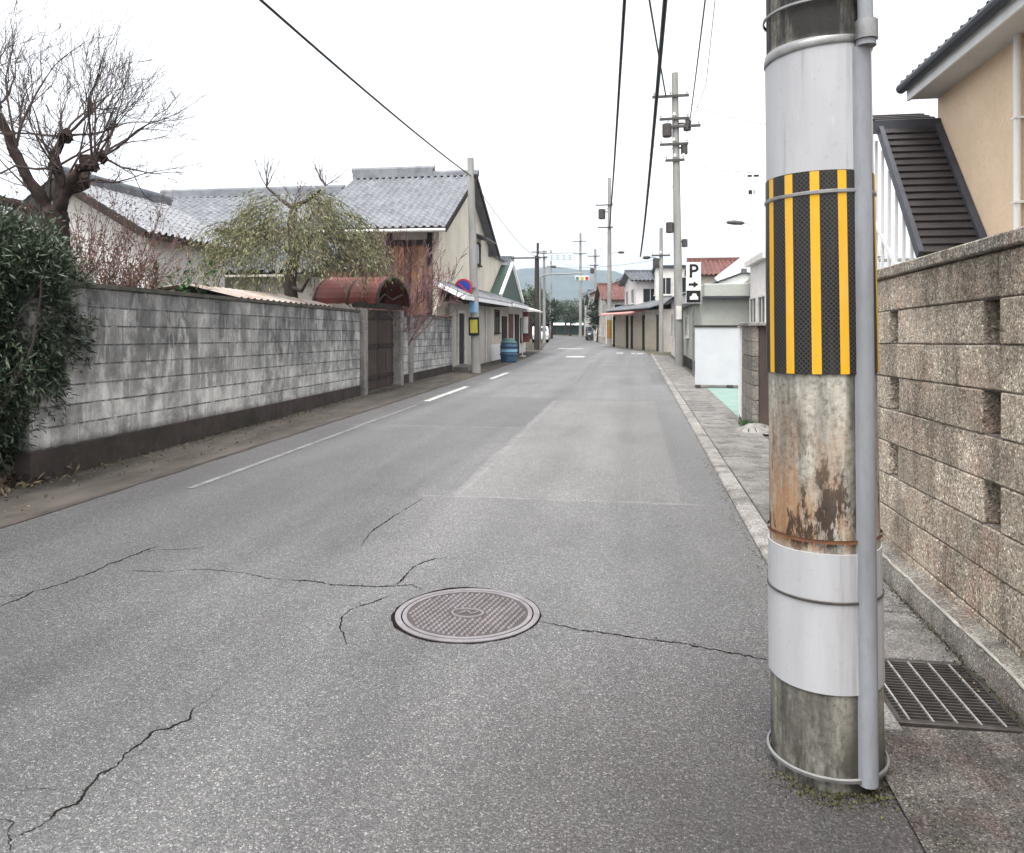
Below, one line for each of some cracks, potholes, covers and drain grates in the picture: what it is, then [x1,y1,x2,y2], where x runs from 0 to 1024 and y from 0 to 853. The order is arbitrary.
crack [545,622,768,660]
crack [6,687,221,849]
manhole cover [391,587,542,644]
drain grate [884,659,1024,734]
crack [0,546,447,645]
